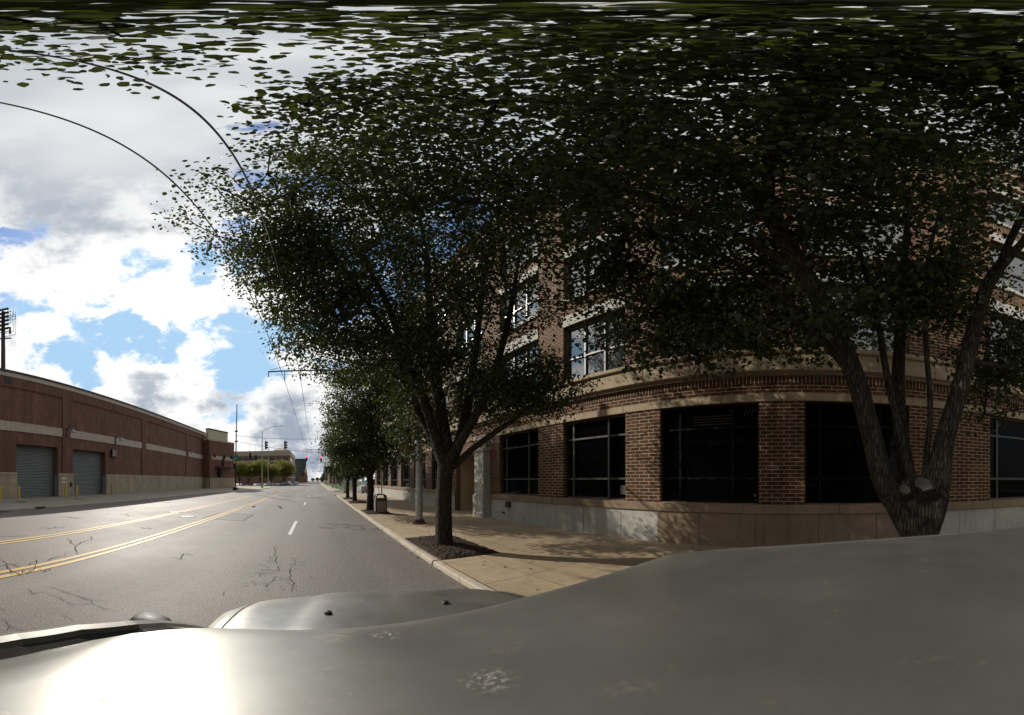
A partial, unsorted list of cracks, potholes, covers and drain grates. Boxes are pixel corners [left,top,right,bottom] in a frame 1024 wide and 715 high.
crack [253,546,314,590]
crack [0,516,105,619]
